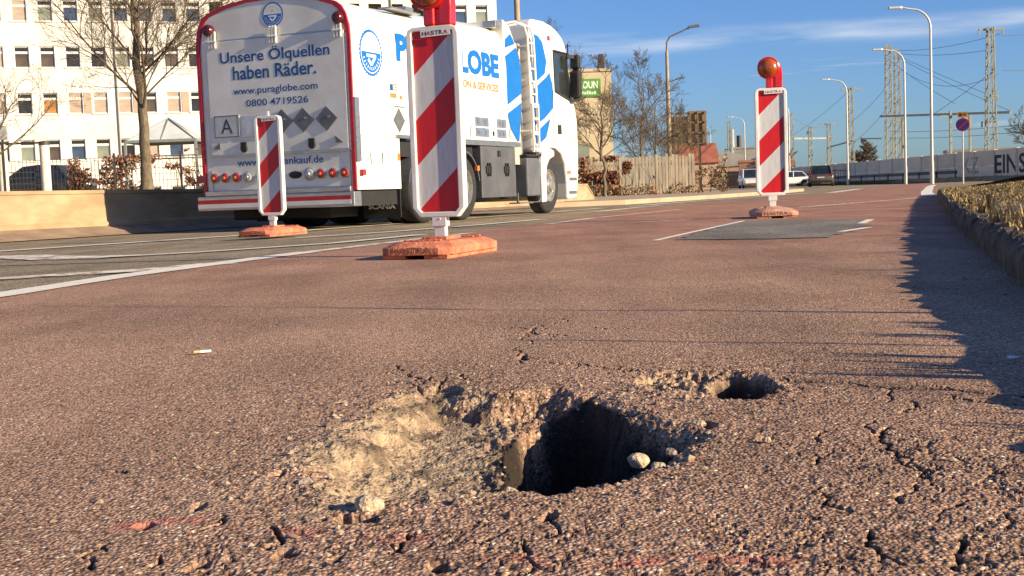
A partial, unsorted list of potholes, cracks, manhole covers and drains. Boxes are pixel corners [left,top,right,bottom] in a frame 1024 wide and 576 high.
crack [779,375,1024,567]
crack [69,541,112,572]
pothole [625,369,795,401]
crack [262,526,289,552]
pothole [279,385,707,505]
crack [145,555,165,569]
crack [190,515,229,534]
